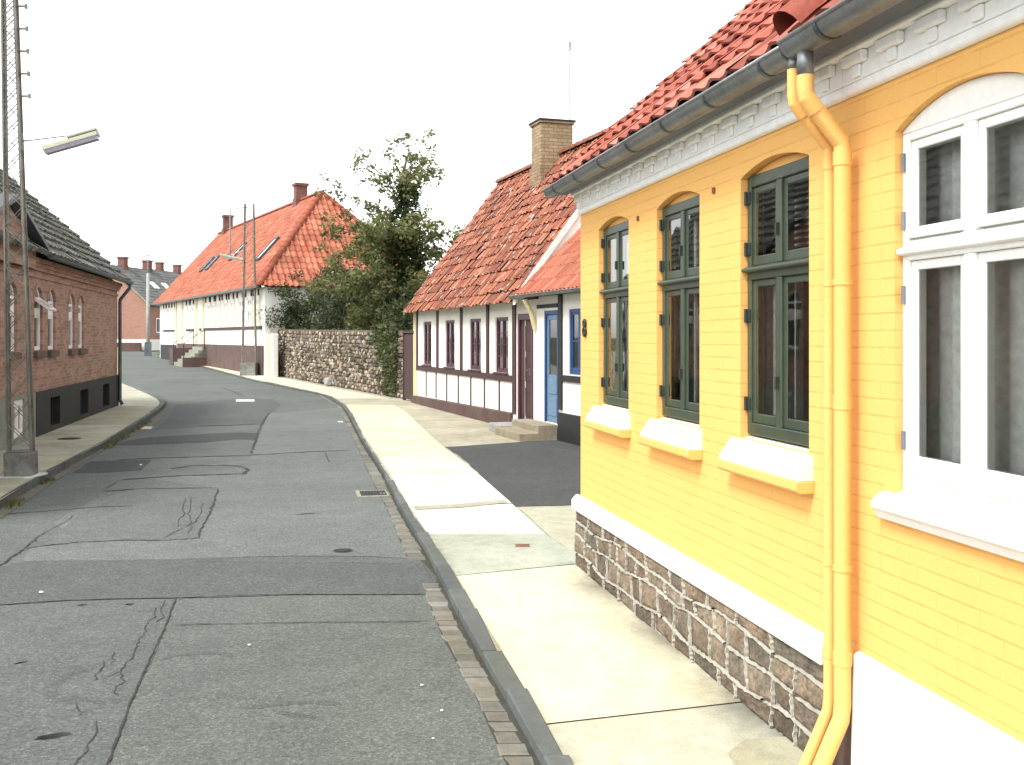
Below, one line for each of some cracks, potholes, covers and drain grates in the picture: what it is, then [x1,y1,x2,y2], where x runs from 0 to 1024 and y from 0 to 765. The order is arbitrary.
crack [0,480,219,566]
crack [74,703,98,765]
crack [95,607,156,696]
